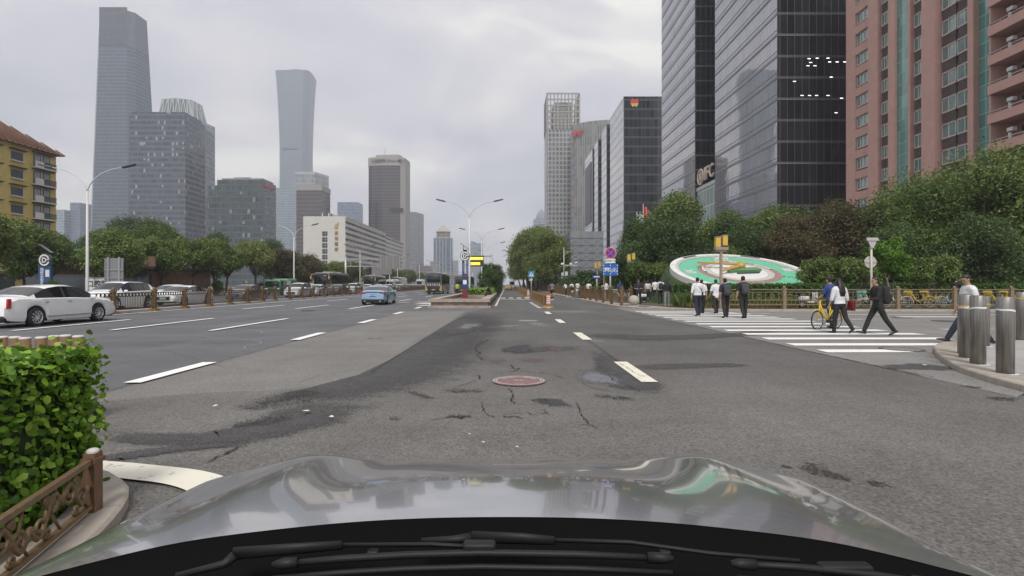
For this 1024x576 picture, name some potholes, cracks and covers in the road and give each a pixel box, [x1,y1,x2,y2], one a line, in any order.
crack [432,365,640,428]
manhole cover [493,376,545,386]
pothole [575,371,626,385]
